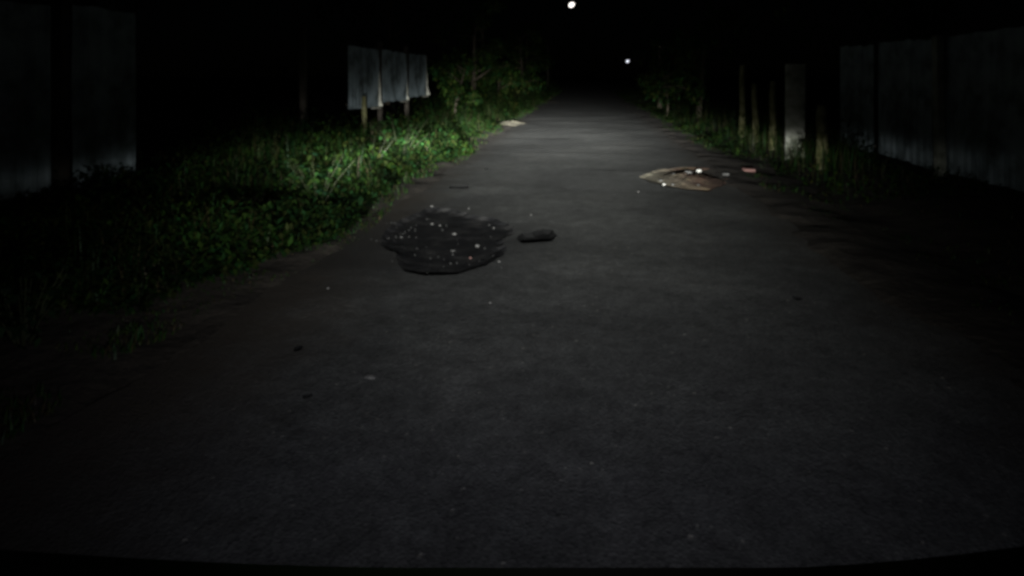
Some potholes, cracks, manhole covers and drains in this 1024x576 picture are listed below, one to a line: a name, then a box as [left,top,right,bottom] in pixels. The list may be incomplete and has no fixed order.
pothole [380,207,516,276]
pothole [639,167,730,192]
